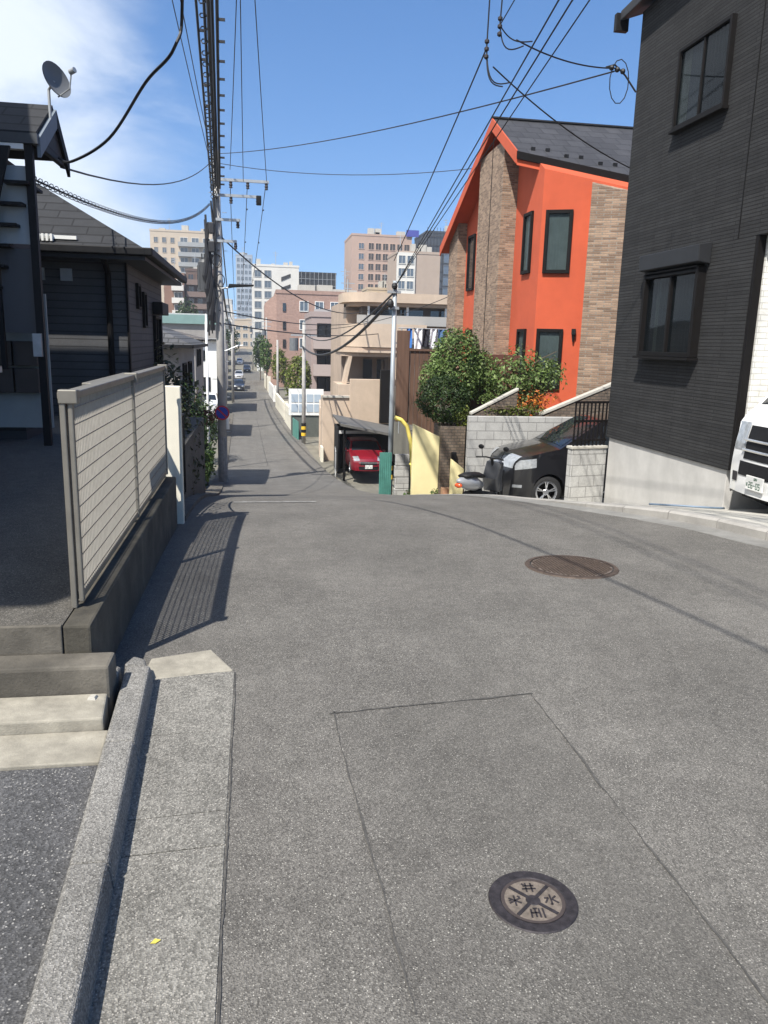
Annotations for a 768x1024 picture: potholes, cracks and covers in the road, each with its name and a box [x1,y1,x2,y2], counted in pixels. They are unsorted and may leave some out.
manhole cover [525,555,619,579]
manhole cover [488,871,579,934]
